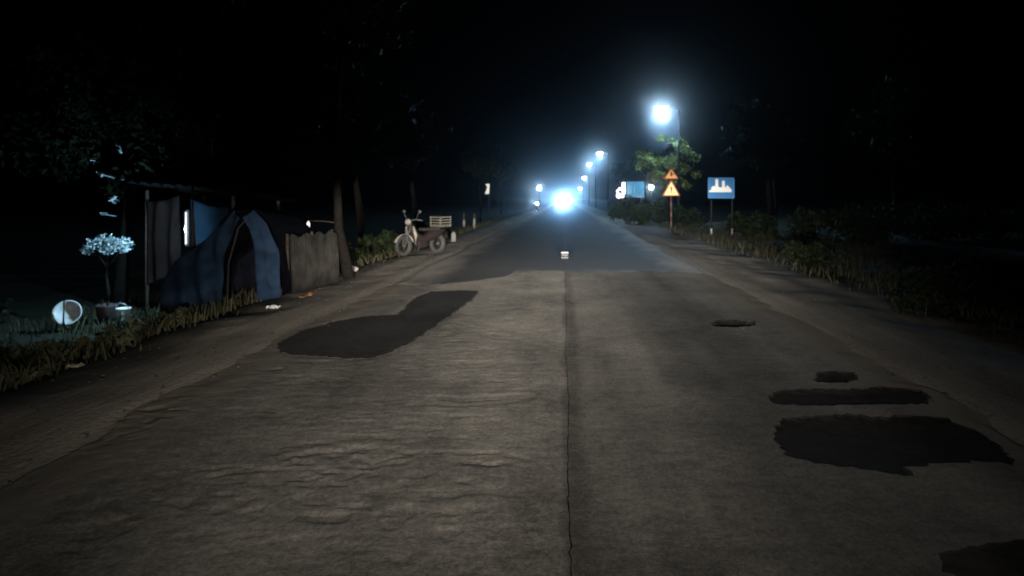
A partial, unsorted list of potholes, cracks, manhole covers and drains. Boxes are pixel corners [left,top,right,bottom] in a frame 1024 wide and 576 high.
pothole [760,409,1024,483]
pothole [755,384,945,410]
pothole [703,318,764,329]
pothole [803,368,869,386]
pothole [917,530,1024,576]
